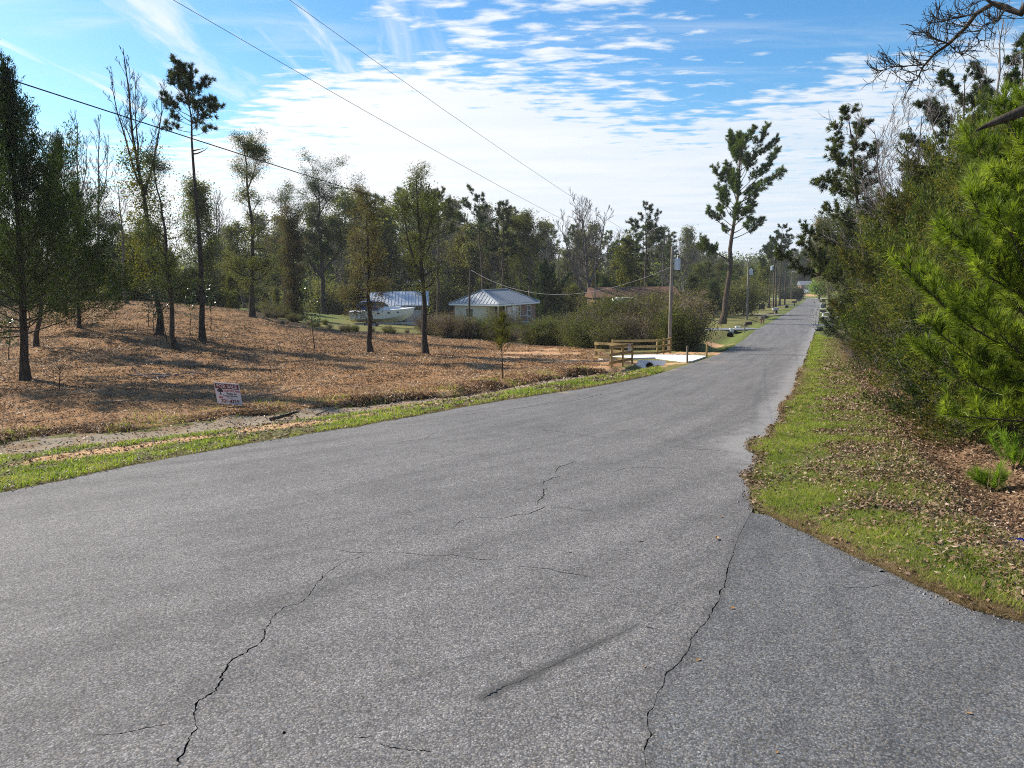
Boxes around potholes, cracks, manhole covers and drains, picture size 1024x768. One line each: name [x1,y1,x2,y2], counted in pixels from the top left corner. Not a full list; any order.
crack [106,547,486,766]
crack [452,462,600,529]
